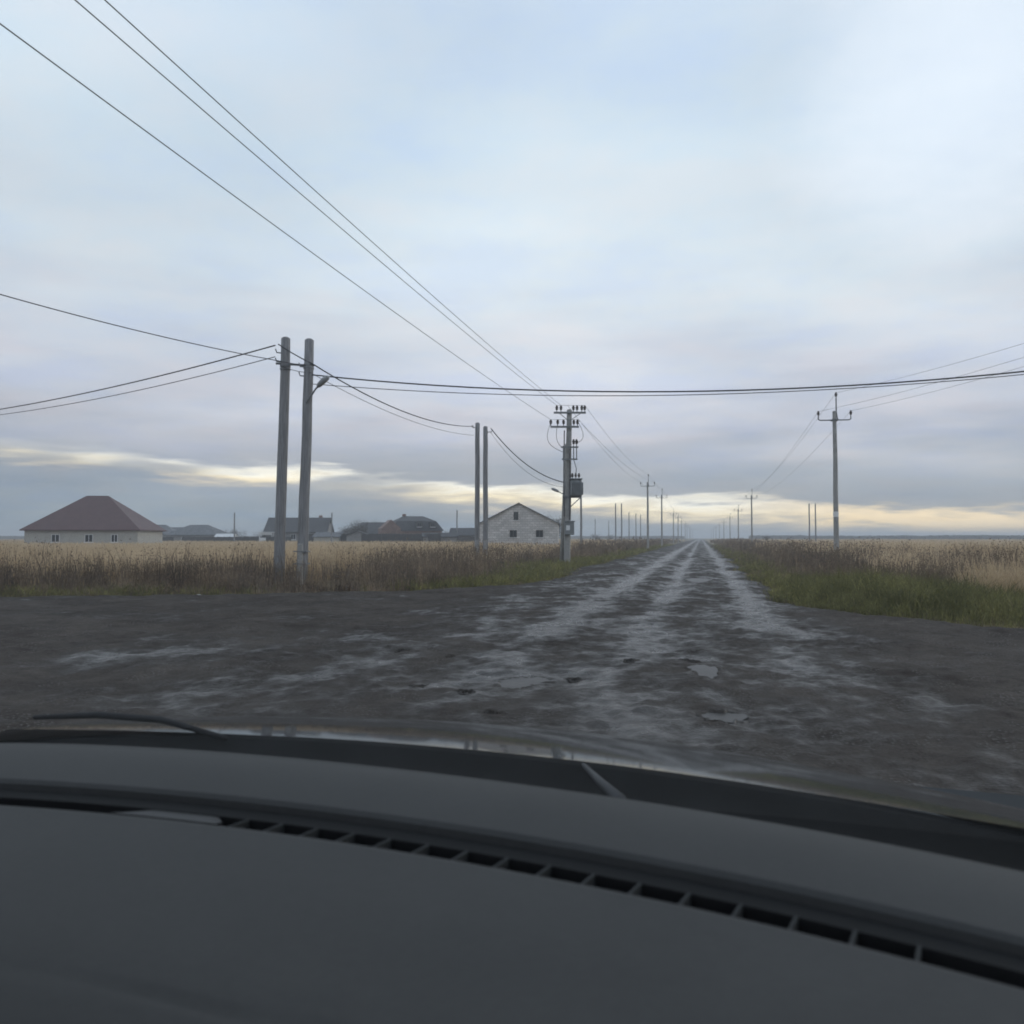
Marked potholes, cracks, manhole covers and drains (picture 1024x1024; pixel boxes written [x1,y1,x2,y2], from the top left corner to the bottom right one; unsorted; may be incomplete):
pothole [696,708,753,724]
pothole [684,664,725,680]
